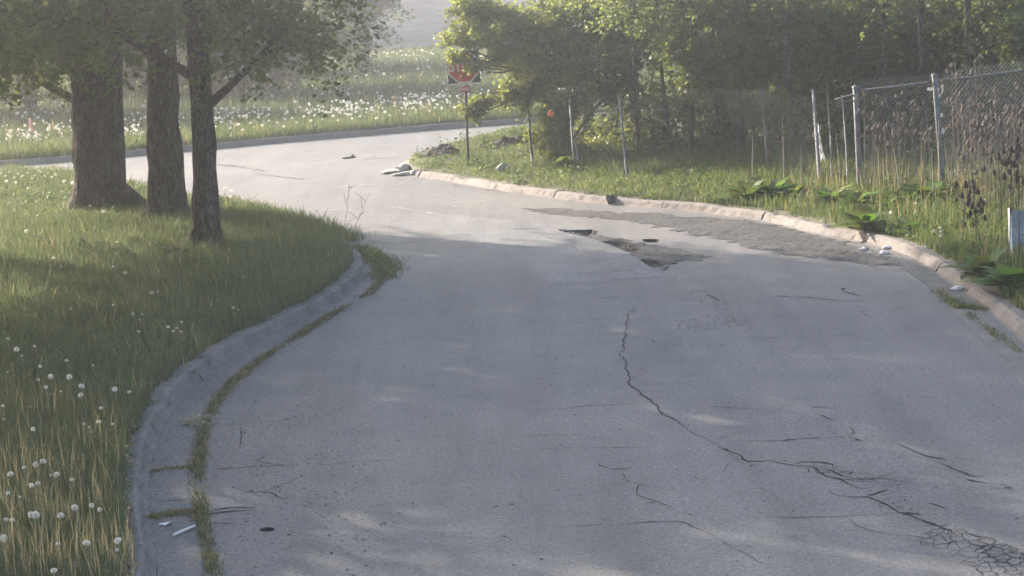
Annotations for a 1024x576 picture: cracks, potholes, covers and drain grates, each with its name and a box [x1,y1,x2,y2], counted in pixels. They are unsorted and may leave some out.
crack [533,289,1024,576]
pothole [559,229,599,238]
pothole [604,240,643,254]
